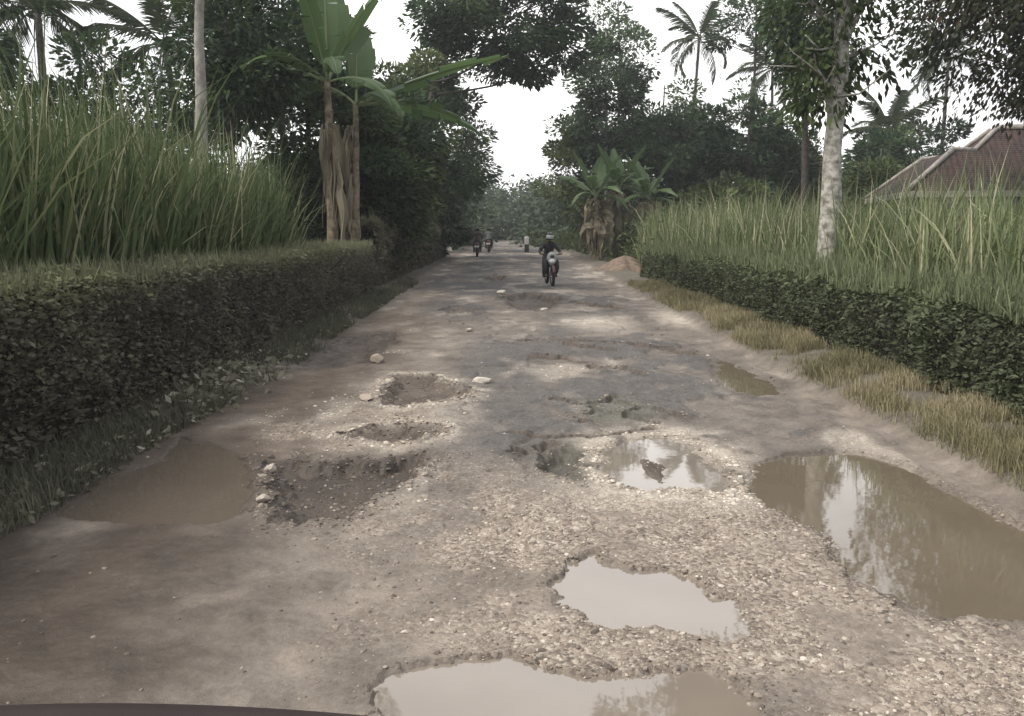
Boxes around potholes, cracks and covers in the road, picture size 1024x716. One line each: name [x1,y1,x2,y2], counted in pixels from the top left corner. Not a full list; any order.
pothole [367,649,766,716]
pothole [495,292,565,312]
pothole [593,435,738,493]
pothole [52,436,256,526]
pothole [336,420,448,443]
pothole [546,548,759,643]
pothole [261,451,434,525]
pothole [707,355,788,398]
pothole [742,449,1024,622]
pothole [379,373,474,406]
pothole [535,443,588,481]
